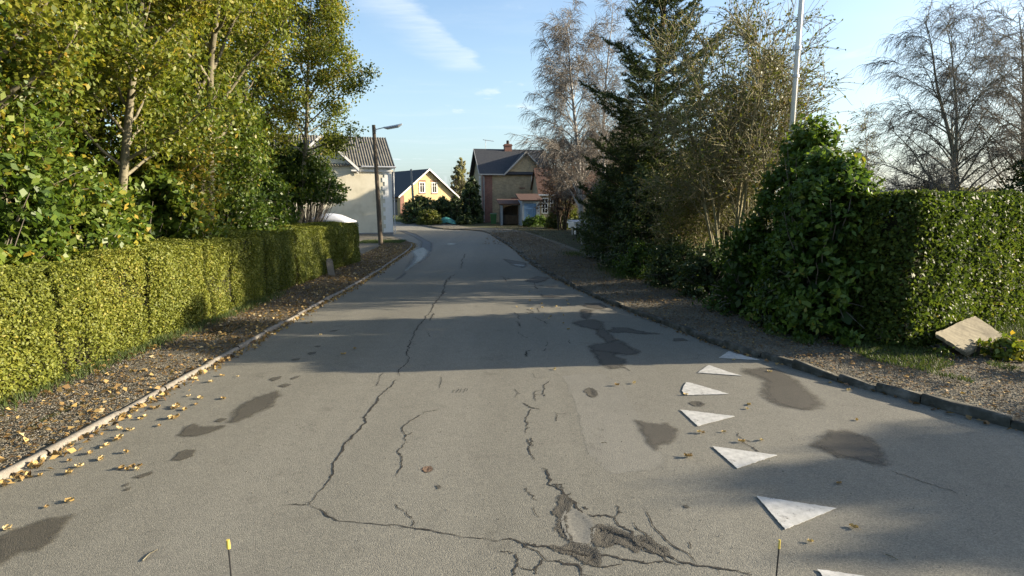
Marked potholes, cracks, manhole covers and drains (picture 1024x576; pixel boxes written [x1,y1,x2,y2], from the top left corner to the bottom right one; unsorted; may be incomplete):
pothole [549,542,602,567]
crack [283,254,751,576]
pothole [590,524,647,553]
pothole [552,494,573,541]
